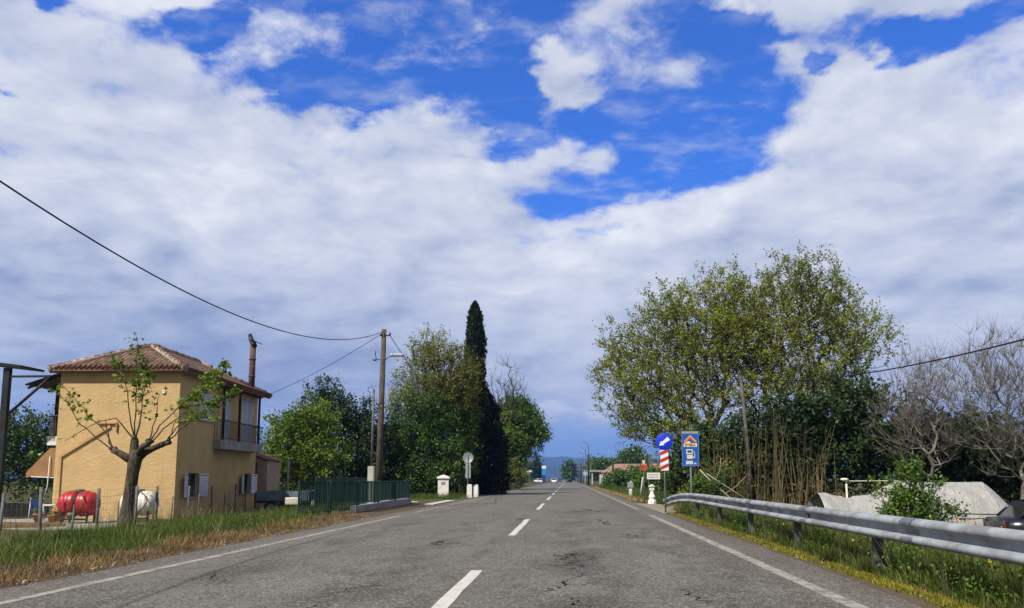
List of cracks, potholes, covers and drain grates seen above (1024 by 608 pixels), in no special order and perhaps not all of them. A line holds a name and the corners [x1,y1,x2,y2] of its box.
crack [677,588,712,605]
crack [567,508,660,539]
